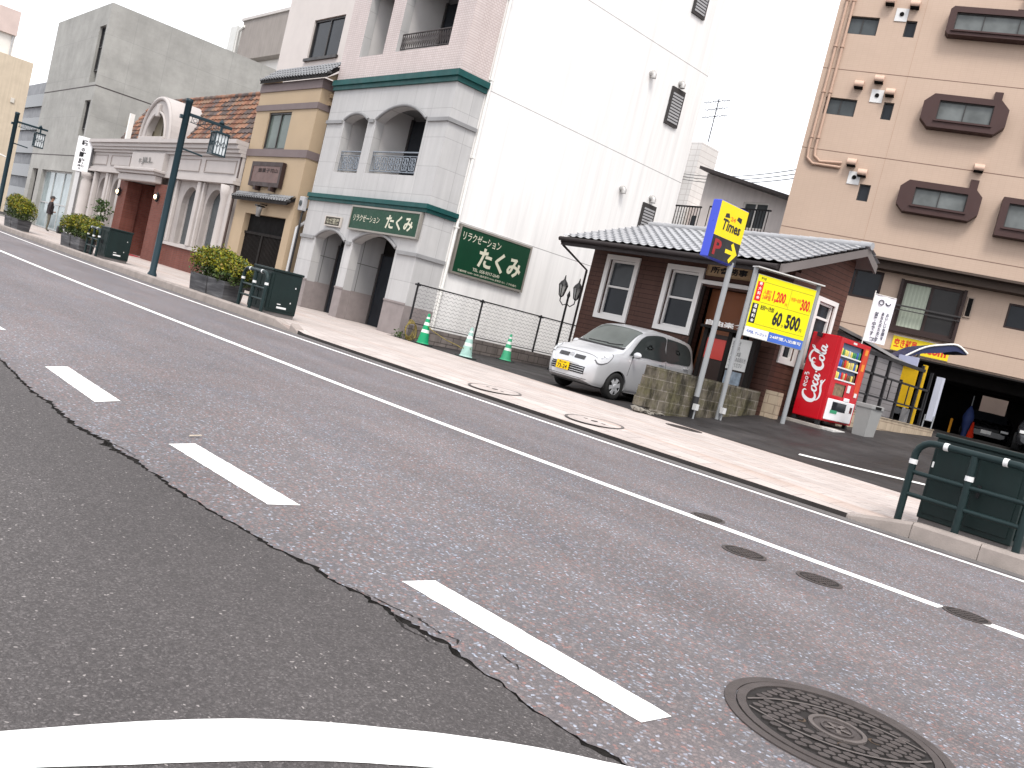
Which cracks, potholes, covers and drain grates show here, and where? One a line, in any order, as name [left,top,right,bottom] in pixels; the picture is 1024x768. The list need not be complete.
manhole cover [691,512,725,524]
manhole cover [722,545,767,561]
manhole cover [468,383,522,395]
manhole cover [796,571,843,589]
manhole cover [565,414,624,429]
manhole cover [724,677,956,768]
manhole cover [942,606,992,625]
crack [0,360,627,766]
